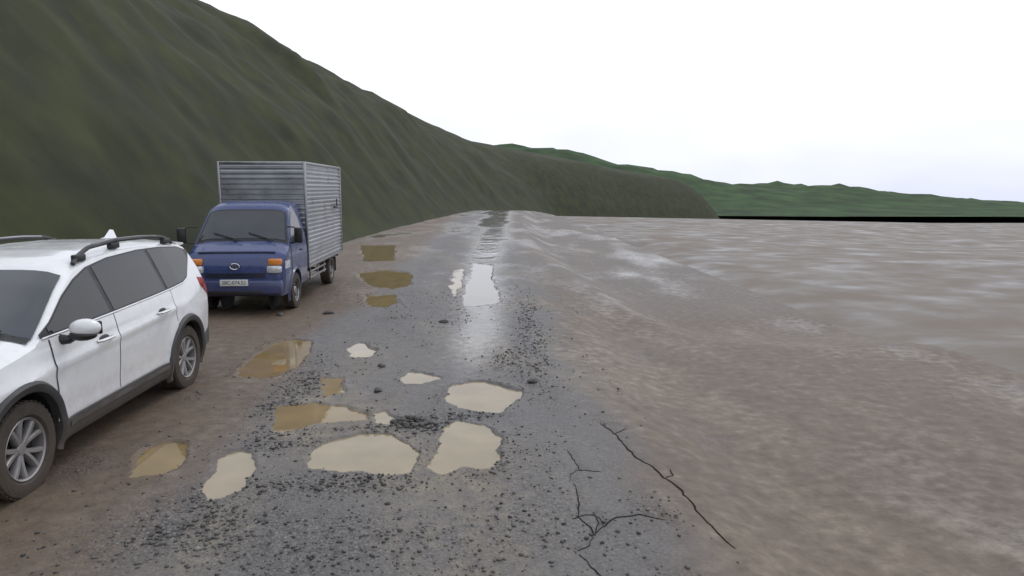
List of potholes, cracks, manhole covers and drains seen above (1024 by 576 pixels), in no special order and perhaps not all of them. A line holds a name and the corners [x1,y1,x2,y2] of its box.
pothole [265,401,376,434]
pothole [355,269,416,289]
pothole [368,409,405,428]
pothole [355,244,399,261]
crack [568,424,736,576]
pothole [123,437,194,480]
pothole [443,379,528,414]
pothole [418,419,508,475]
pothole [396,370,445,384]
pothole [230,338,315,379]
pothole [359,294,404,308]
pothole [344,342,380,358]
